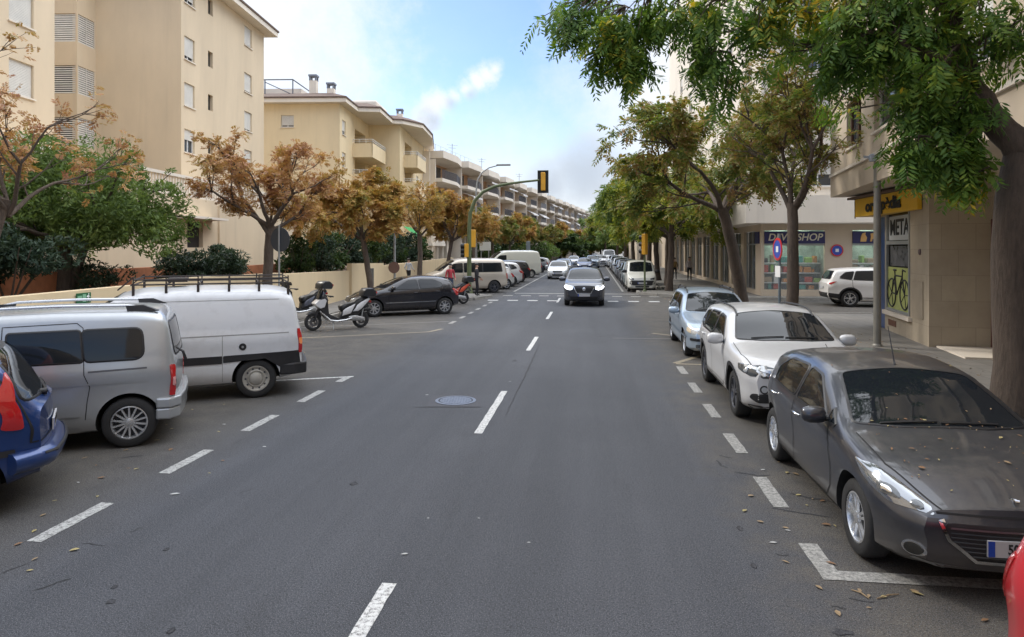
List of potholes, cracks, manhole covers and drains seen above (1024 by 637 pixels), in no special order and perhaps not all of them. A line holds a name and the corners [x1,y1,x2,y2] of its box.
manhole cover [426,395,483,407]
crack [716,455,767,476]
